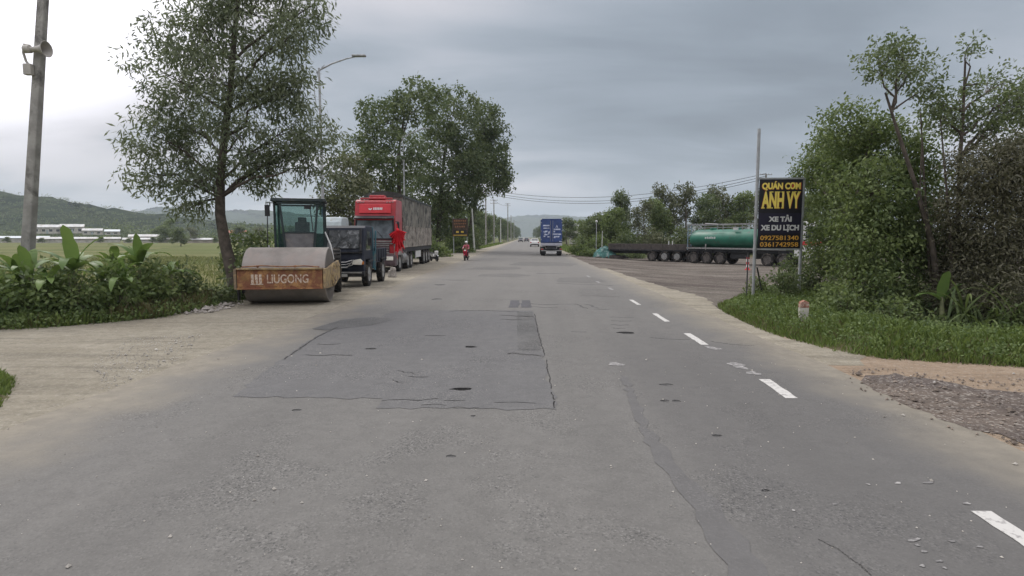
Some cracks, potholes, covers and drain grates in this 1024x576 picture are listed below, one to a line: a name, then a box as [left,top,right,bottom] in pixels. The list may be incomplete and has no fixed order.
crack [818,539,872,576]
